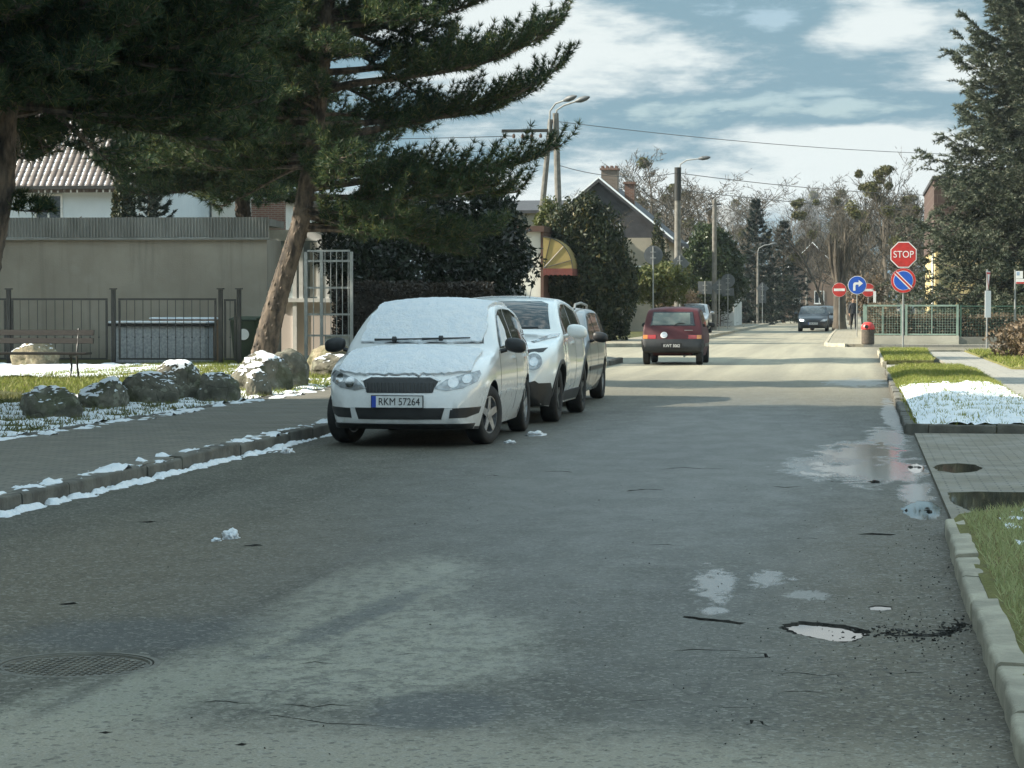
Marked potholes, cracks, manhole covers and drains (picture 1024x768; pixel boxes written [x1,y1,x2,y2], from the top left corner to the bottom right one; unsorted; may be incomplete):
pothole [933,463,982,473]
manhole cover [0,652,161,678]
crack [270,704,362,725]
pothole [900,501,942,520]
pothole [779,621,871,642]
pothole [948,491,1024,512]
